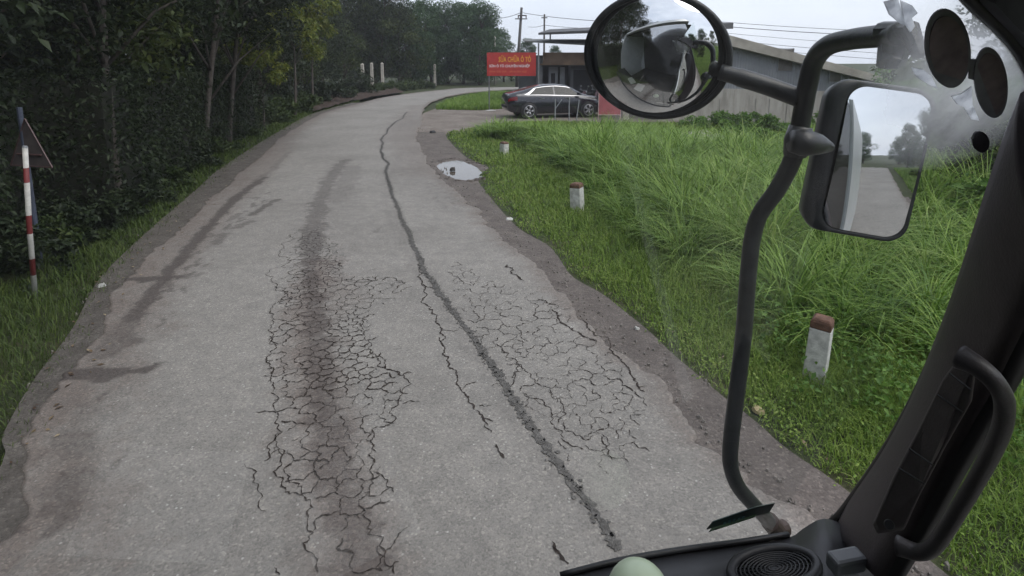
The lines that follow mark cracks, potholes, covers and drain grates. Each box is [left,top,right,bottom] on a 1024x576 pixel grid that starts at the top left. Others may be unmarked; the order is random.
pothole [430,157,490,182]
crack [452,264,648,471]
crack [244,229,413,575]
crack [417,264,505,458]
